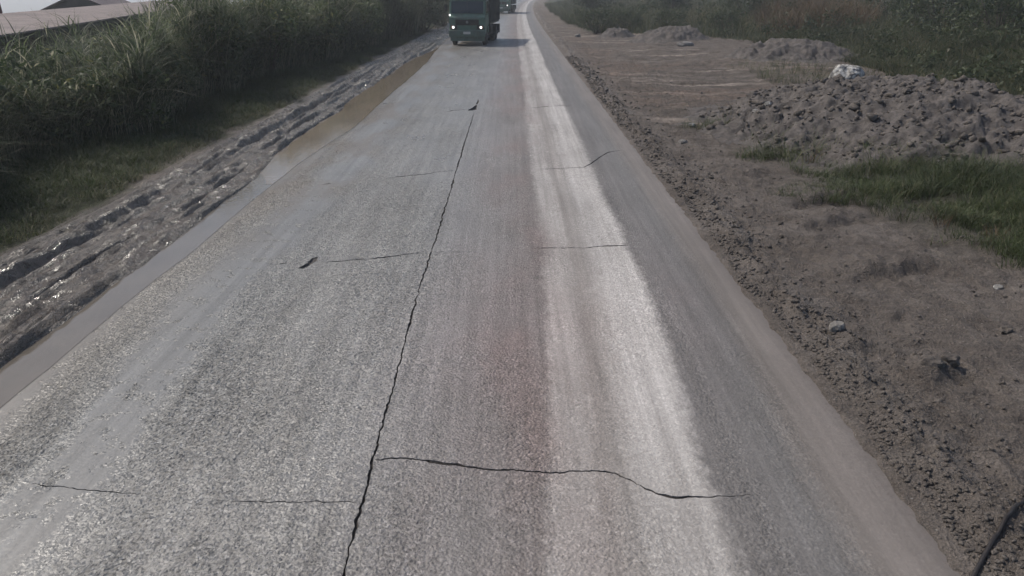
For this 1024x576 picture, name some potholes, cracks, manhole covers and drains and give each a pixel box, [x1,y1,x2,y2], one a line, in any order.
crack [254,110,734,576]
